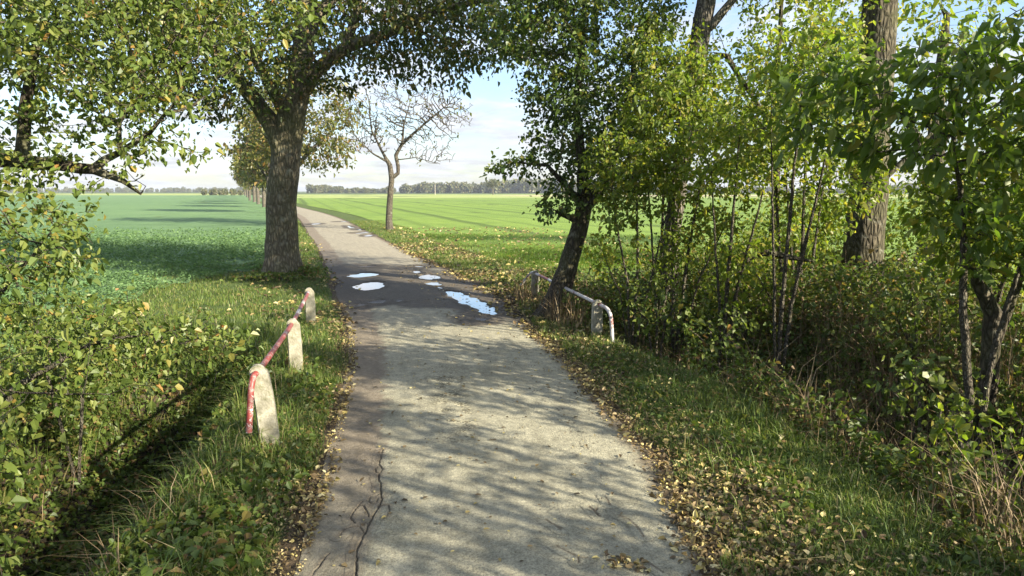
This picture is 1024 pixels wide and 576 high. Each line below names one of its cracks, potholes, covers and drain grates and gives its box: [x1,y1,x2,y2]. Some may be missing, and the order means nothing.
crack [300,447,400,576]
